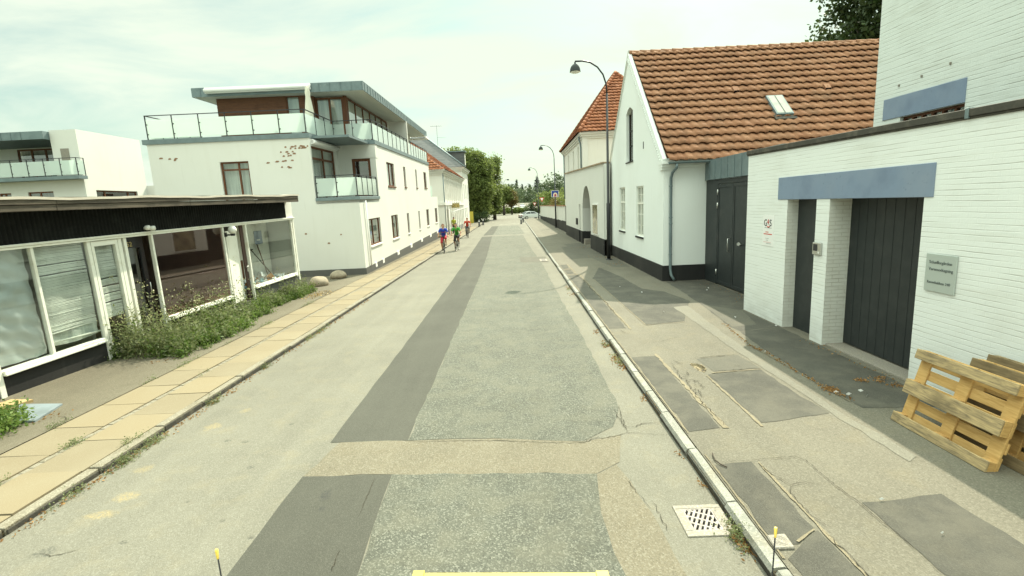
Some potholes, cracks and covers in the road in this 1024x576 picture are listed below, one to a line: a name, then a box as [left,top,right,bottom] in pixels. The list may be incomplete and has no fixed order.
crack [417,409,670,443]
crack [671,354,748,424]
drain grate [672,504,732,538]
